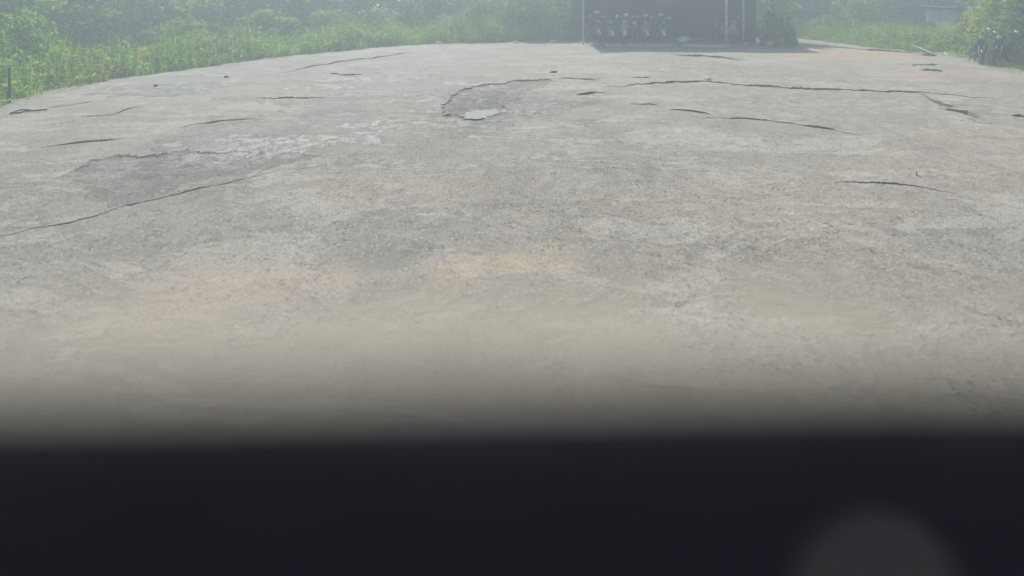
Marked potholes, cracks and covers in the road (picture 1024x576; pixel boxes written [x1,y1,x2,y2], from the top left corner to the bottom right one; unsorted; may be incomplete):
crack [834,171,950,193]
crack [44,102,141,117]
crack [185,118,252,127]
pothole [441,79,553,121]
crack [283,52,413,76]
crack [563,77,993,136]
crack [3,169,283,236]
crack [40,138,124,148]
